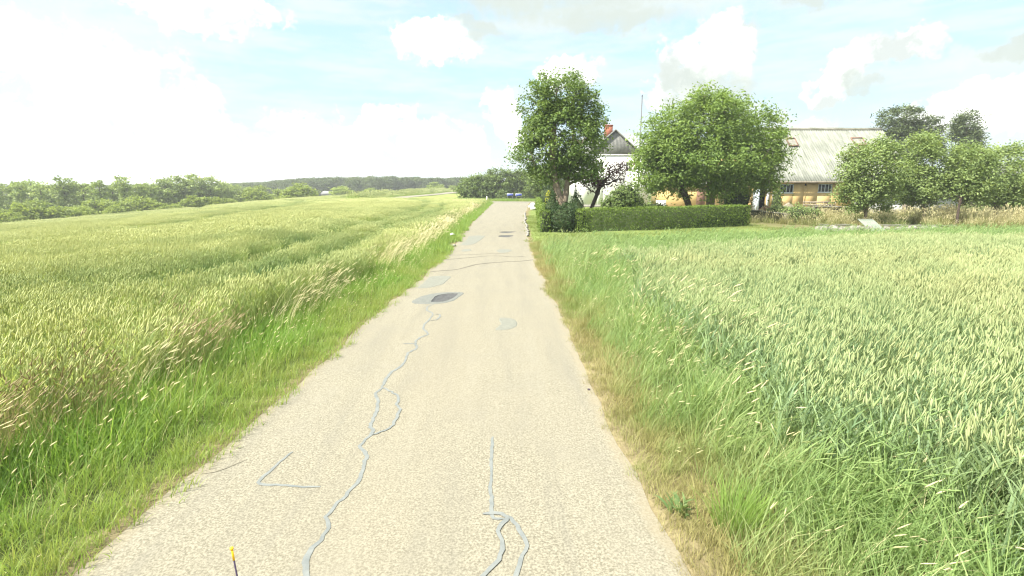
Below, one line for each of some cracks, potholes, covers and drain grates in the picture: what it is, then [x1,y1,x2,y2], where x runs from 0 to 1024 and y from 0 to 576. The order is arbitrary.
crack [431,253,527,272]
pothole [431,293,458,302]
